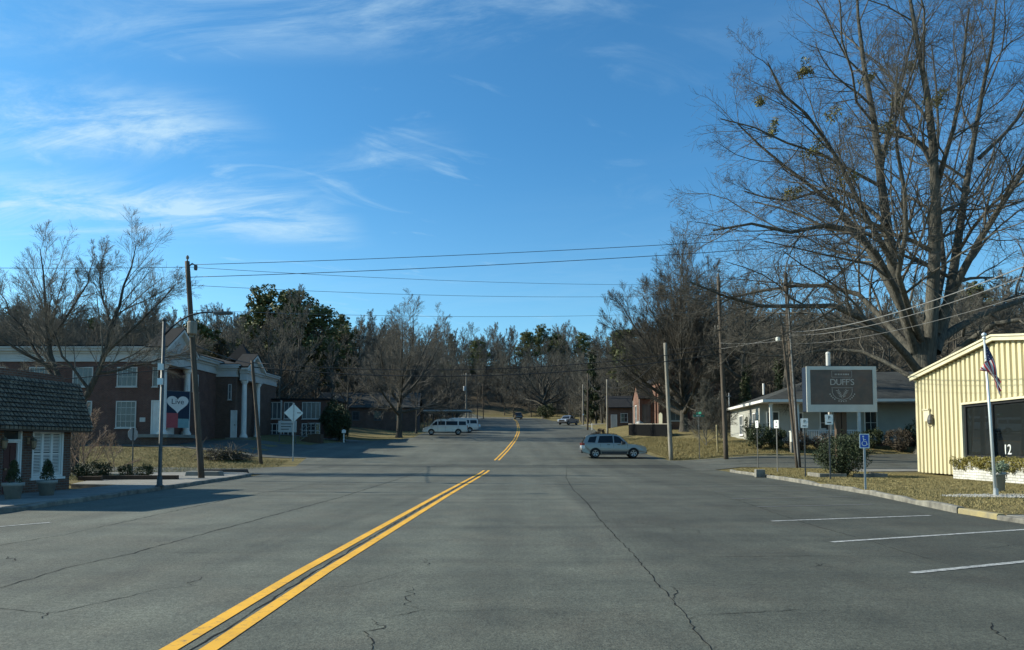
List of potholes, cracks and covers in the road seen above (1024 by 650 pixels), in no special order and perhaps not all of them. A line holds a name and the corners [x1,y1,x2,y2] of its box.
crack [0,577,202,618]
crack [0,475,409,588]
